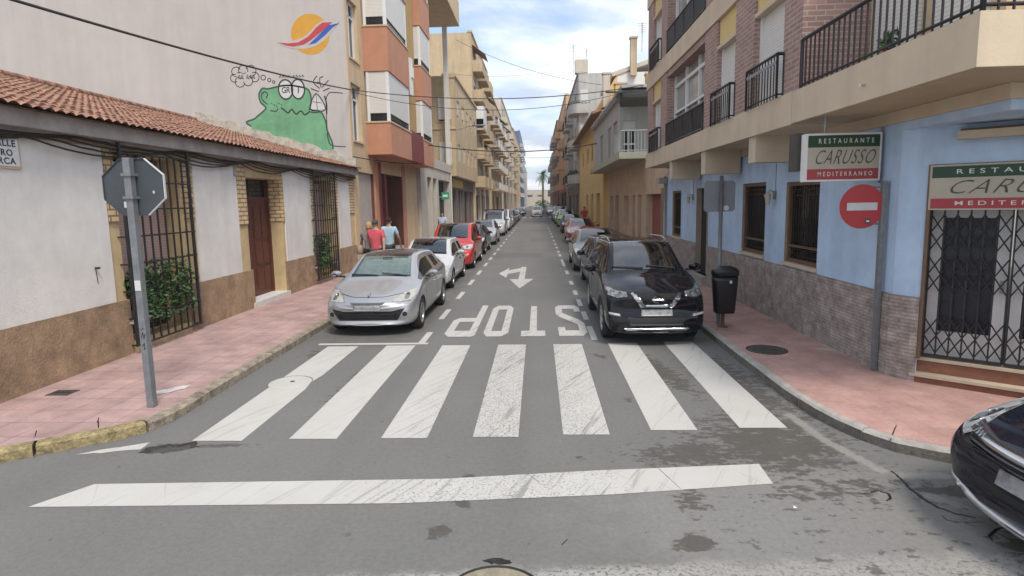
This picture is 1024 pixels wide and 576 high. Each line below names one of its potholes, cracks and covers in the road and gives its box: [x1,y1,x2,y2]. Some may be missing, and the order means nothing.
crack [862,471,1022,546]
manhole cover [267,376,313,389]
manhole cover [746,345,788,355]
manhole cover [459,565,534,576]
